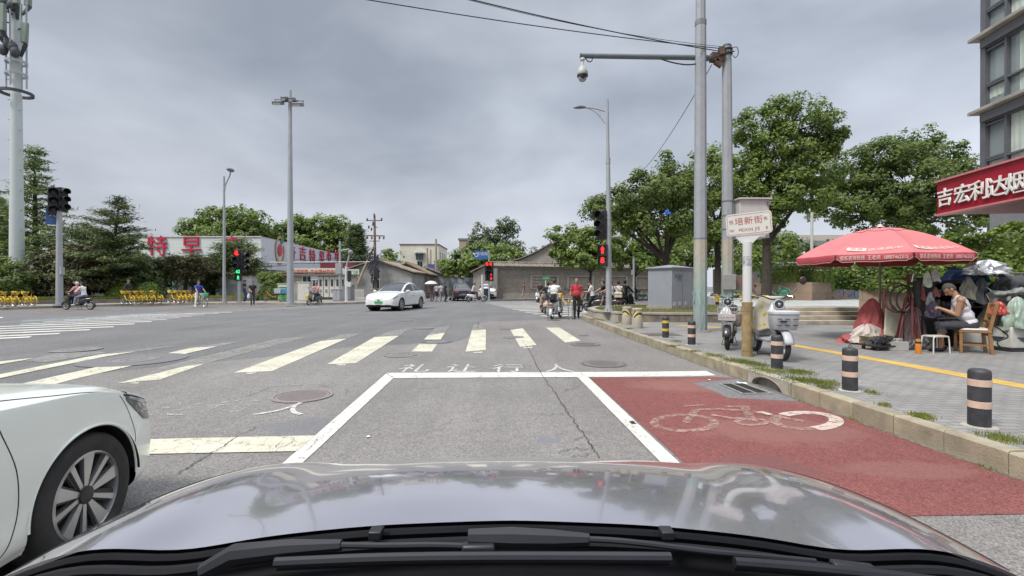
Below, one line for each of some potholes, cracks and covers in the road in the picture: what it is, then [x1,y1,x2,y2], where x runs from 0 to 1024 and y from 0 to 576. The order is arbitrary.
manhole cover [270,389,333,403]
manhole cover [581,360,627,368]
manhole cover [73,353,189,367]
drain grate [719,383,772,394]
crack [516,345,600,459]
